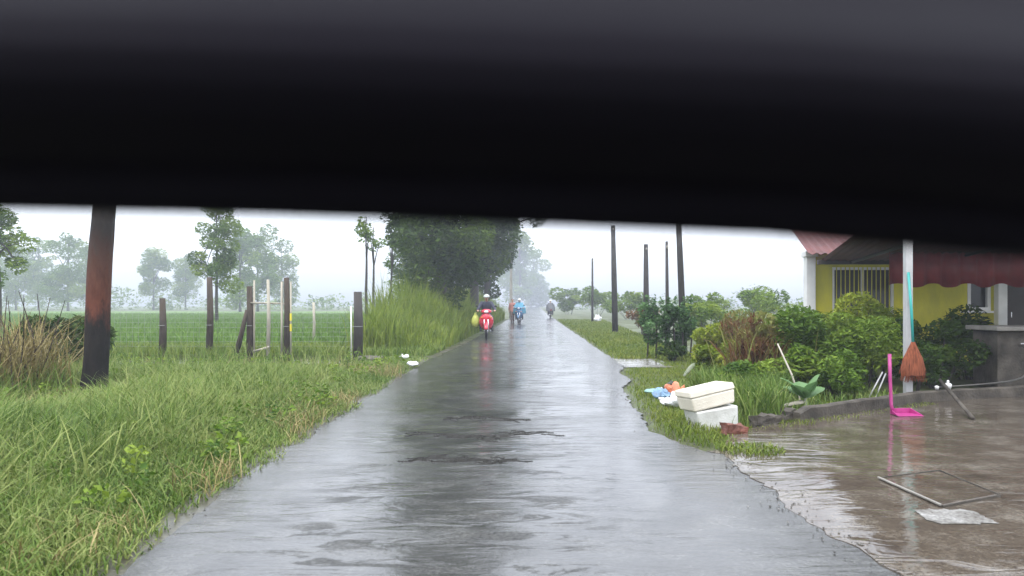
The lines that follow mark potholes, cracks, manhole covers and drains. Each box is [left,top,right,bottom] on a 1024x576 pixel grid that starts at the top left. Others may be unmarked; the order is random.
manhole cover [877,470,1001,508]
